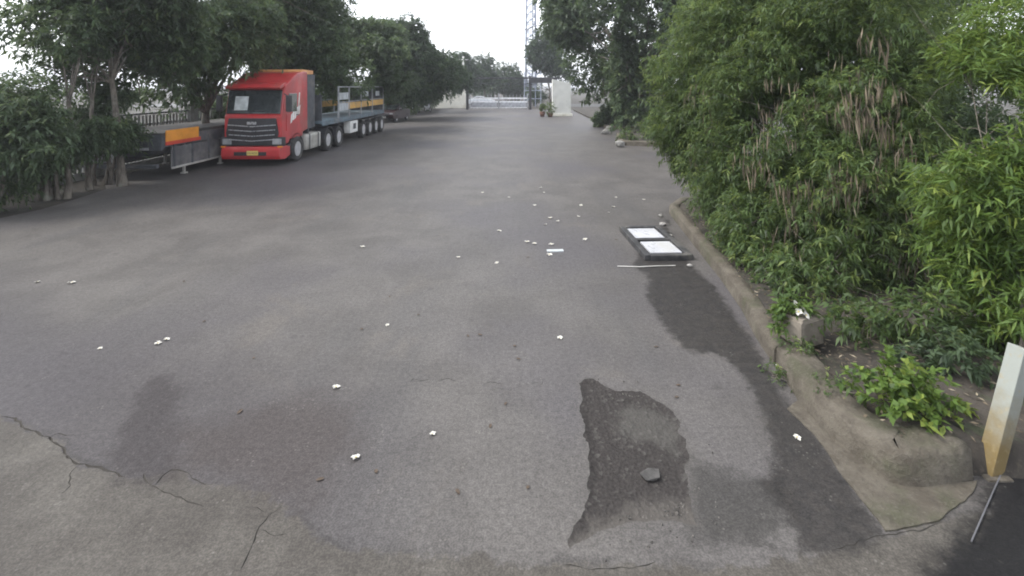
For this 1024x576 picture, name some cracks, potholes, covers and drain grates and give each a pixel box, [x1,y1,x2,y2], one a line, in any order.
crack [143,469,206,507]
crack [566,562,654,570]
pothole [568,379,697,548]
manhole cover [619,225,693,261]
crack [241,506,288,568]
crack [1,416,125,494]
